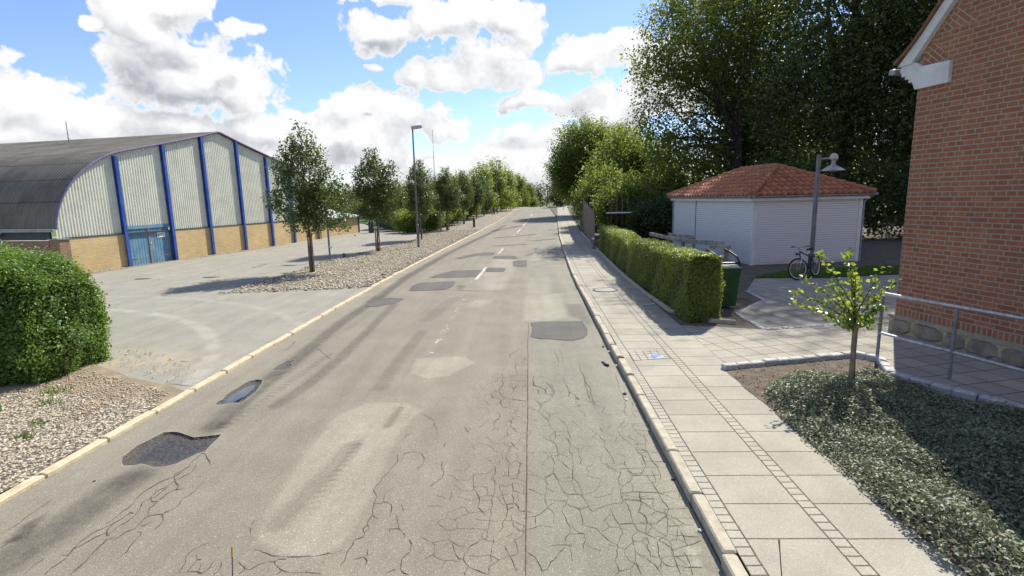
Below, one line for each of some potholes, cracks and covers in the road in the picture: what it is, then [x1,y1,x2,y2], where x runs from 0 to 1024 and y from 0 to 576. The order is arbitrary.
pothole [122,432,221,467]
crack [527,348,708,575]
crack [24,453,211,575]
crack [240,358,532,575]
pothole [273,360,295,371]
pothole [216,380,262,405]
crack [177,543,222,575]
